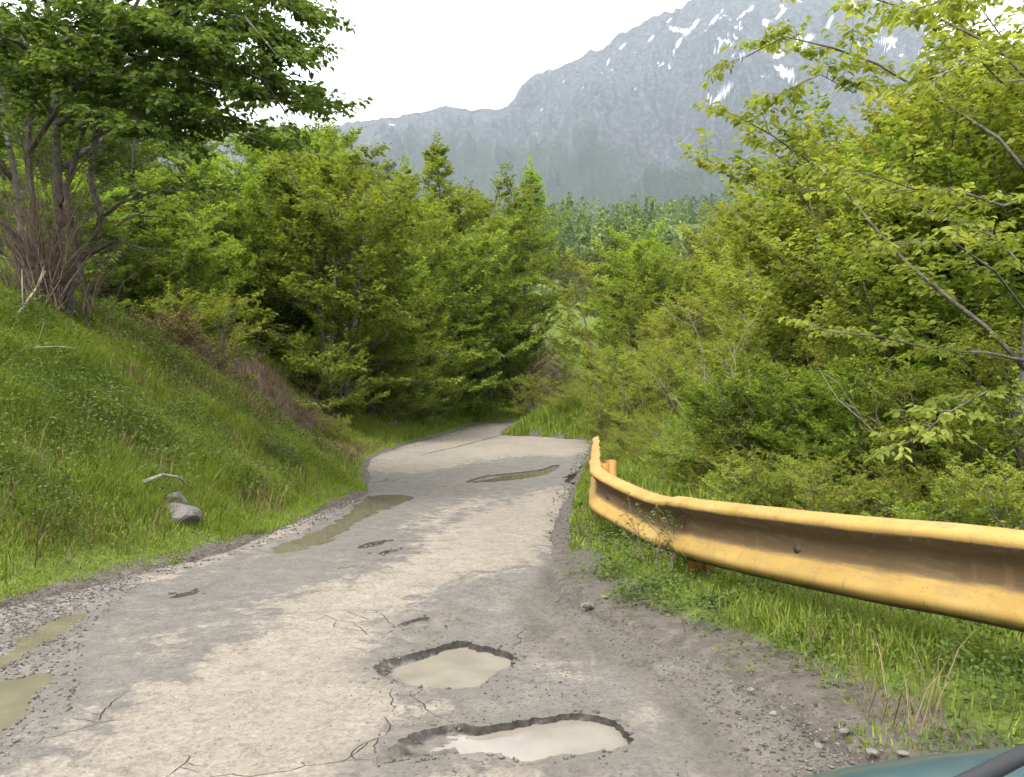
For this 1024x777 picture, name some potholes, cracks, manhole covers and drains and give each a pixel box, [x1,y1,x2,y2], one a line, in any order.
pothole [357,538,394,549]
pothole [372,709,634,767]
crack [37,693,125,744]
pothole [391,612,459,630]
crack [169,689,448,777]
pothole [364,639,526,691]
crack [250,610,394,637]
pothole [466,465,560,483]
